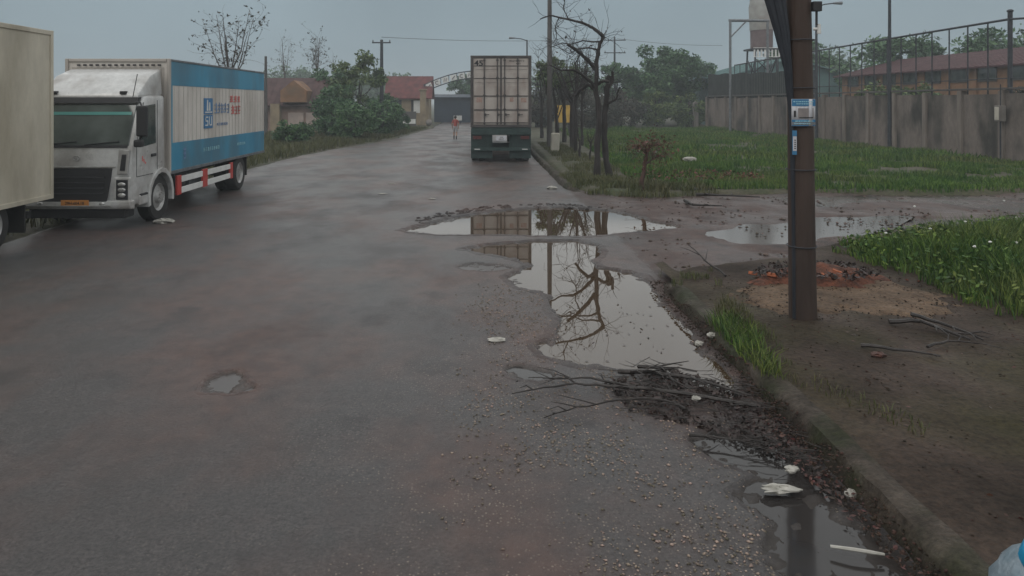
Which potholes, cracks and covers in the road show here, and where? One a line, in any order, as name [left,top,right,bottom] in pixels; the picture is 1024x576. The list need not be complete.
pothole [683,427,925,576]
pothole [195,368,264,396]
pothole [455,238,752,405]
pothole [394,203,686,238]
